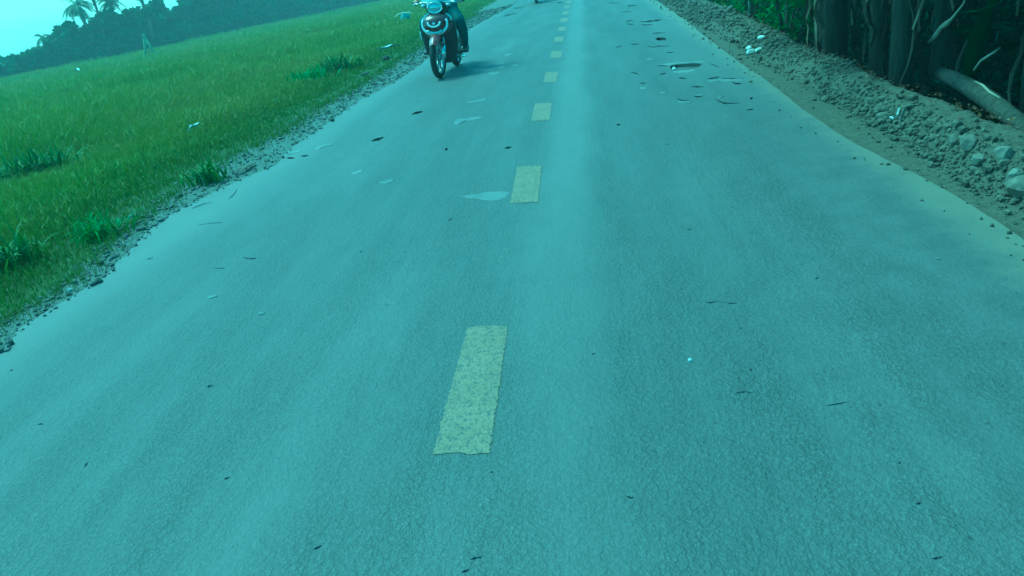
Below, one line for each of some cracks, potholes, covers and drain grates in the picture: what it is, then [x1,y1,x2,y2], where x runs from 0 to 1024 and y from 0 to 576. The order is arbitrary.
pothole [670,63,702,71]
